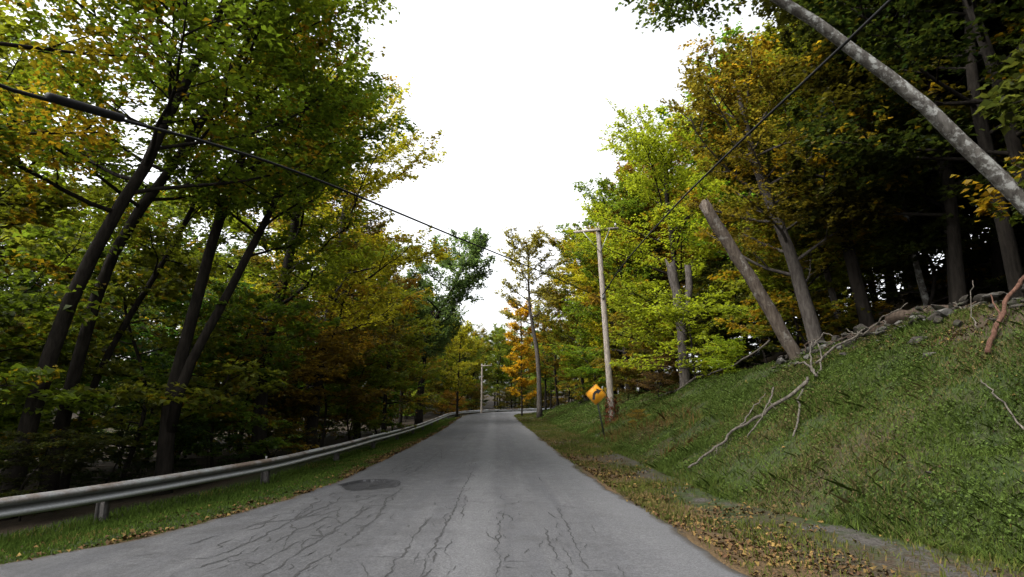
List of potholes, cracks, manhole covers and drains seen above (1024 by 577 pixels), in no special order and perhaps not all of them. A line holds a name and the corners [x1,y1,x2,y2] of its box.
crack [170,462,625,577]
